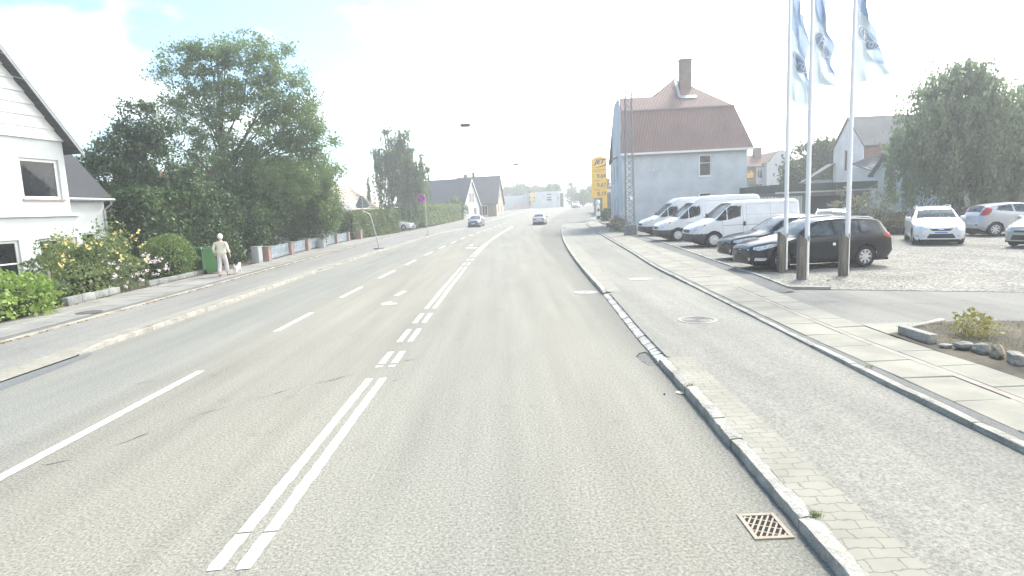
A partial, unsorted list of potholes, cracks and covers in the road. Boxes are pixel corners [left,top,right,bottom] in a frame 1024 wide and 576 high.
drain grate [737,512,795,540]
pothole [636,352,659,366]
manhole cover [678,316,718,324]
